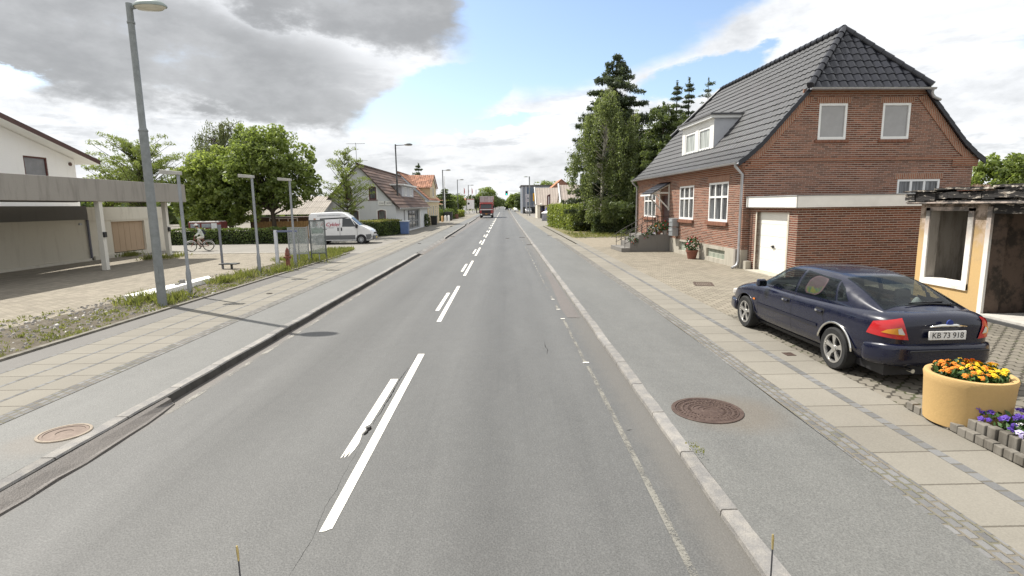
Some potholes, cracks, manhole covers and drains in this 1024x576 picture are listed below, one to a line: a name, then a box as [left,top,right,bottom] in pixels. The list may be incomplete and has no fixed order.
manhole cover [671,398,744,424]
manhole cover [34,423,93,443]
